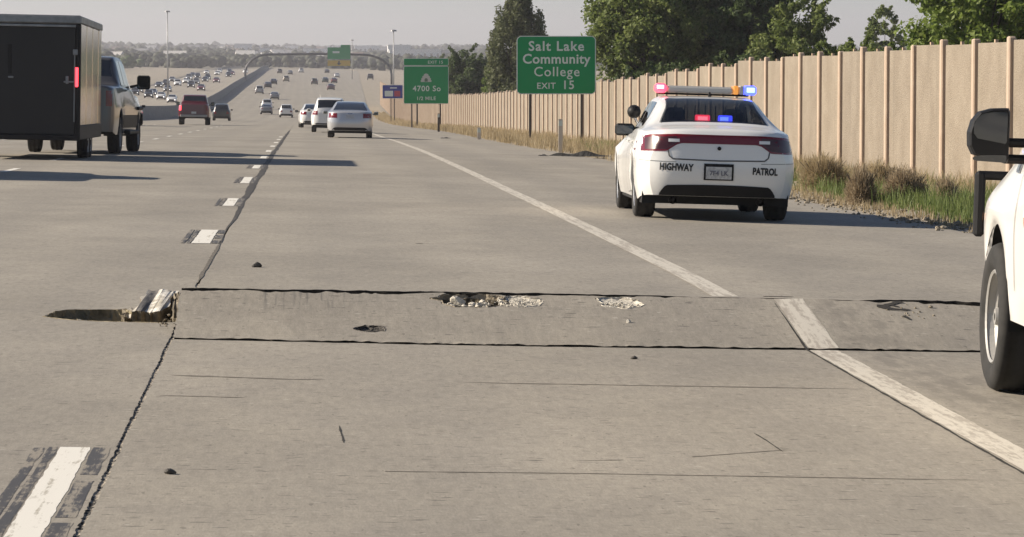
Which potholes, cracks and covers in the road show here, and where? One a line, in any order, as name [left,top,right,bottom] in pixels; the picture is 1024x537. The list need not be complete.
pothole [597,297,645,309]
pothole [430,293,543,308]
pothole [43,309,177,334]
crack [577,433,789,461]
